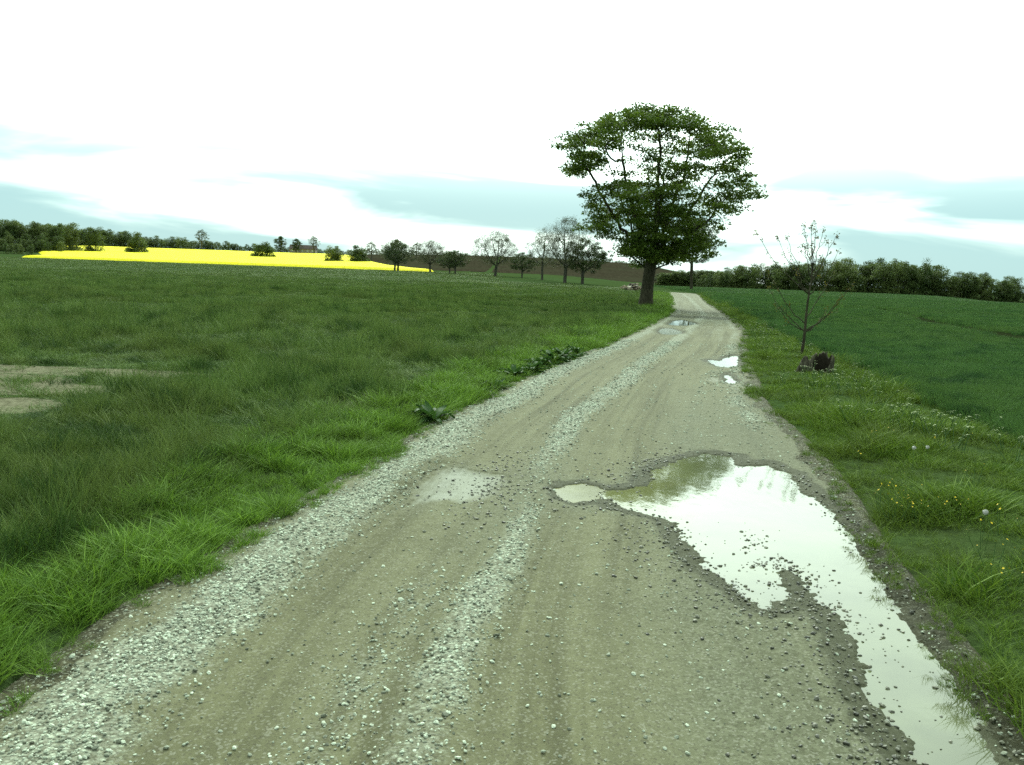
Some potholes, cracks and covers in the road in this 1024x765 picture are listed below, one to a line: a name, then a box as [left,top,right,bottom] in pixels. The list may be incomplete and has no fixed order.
pothole [701,354,745,368]
pothole [599,451,1024,765]
pothole [541,478,613,508]
pothole [391,461,524,509]
pothole [654,327,687,335]
pothole [717,371,744,384]
